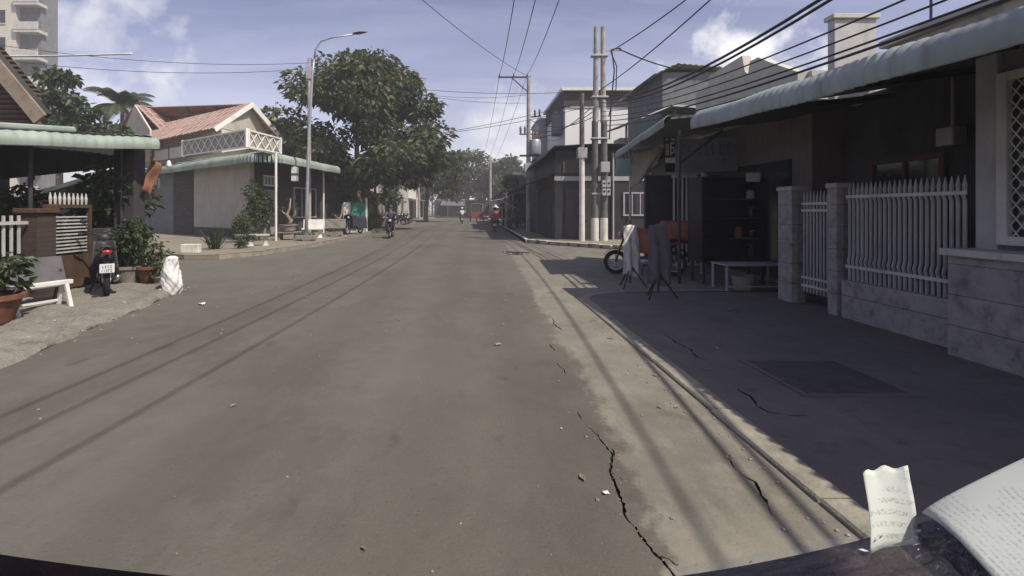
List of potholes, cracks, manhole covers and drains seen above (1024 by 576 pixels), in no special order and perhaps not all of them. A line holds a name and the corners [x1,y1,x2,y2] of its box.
crack [578,413,679,576]
manhole cover [740,359,922,397]
crack [666,335,805,417]
crack [729,458,772,516]
